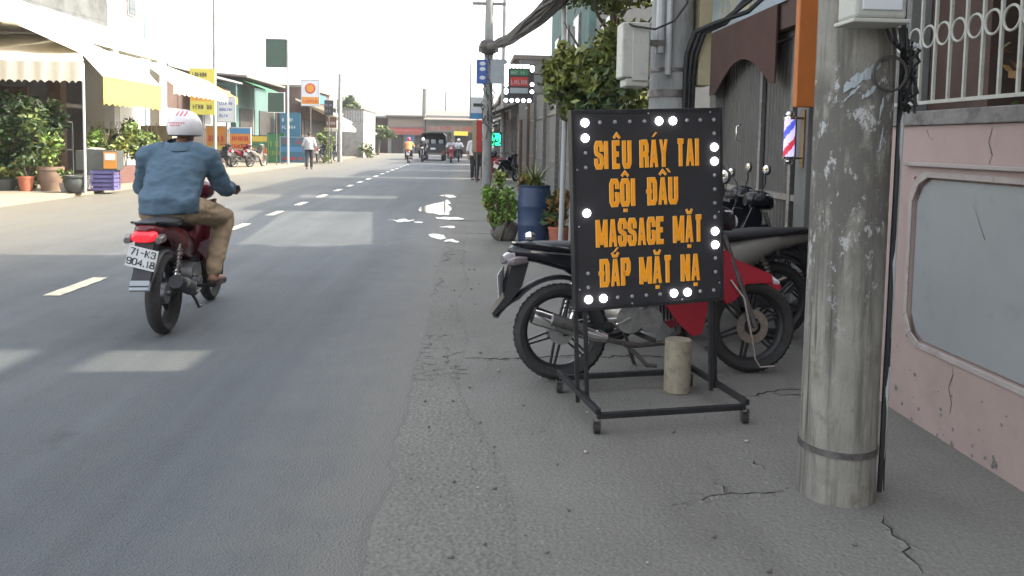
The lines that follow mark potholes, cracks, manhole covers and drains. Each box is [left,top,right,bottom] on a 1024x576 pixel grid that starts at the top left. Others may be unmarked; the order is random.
crack [728,388,801,399]
crack [404,335,664,381]
crack [671,457,784,506]
crack [877,515,928,573]
